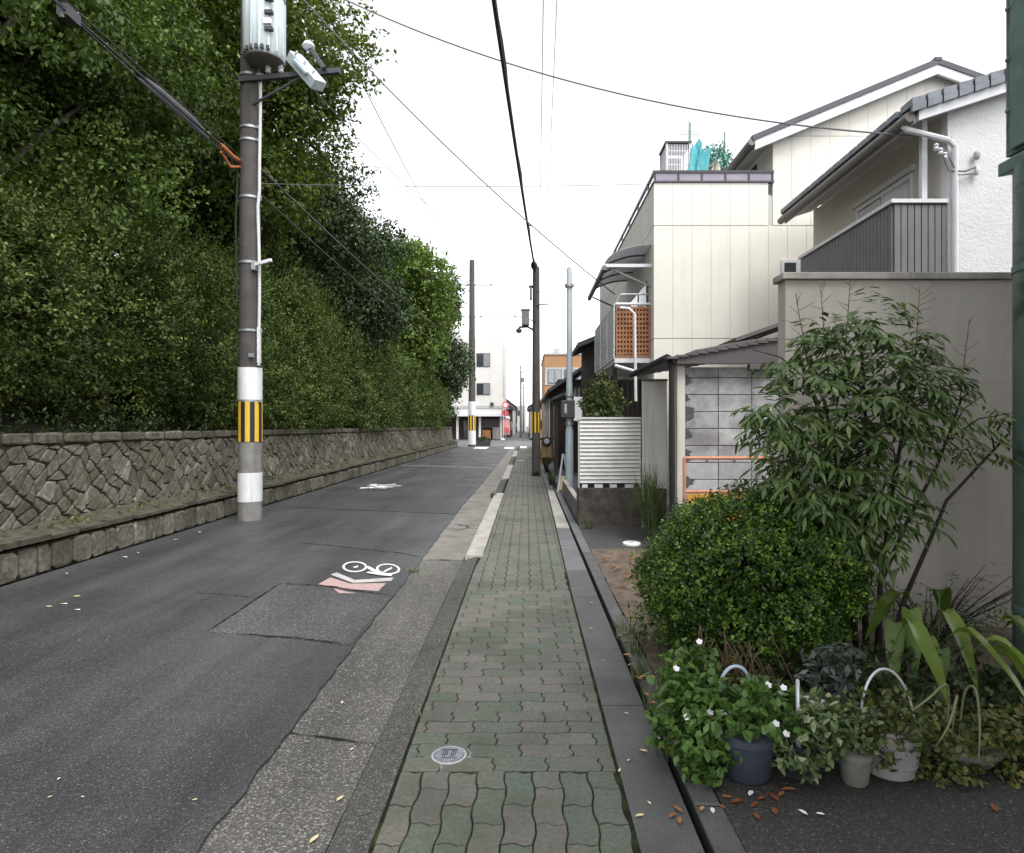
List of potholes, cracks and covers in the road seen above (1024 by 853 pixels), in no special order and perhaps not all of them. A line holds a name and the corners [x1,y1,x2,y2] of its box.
manhole cover [431,746,471,769]
